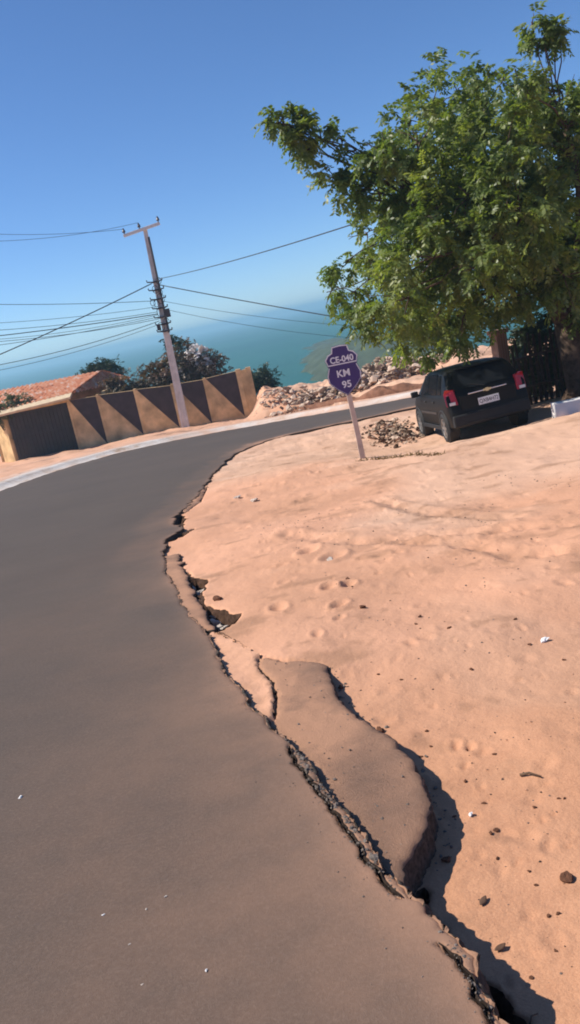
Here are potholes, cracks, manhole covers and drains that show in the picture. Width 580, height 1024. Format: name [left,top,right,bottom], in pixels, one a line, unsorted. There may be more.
crack [438,942,492,1024]
pothole [186,573,242,632]
crack [288,746,401,897]
crack [258,668,277,717]
